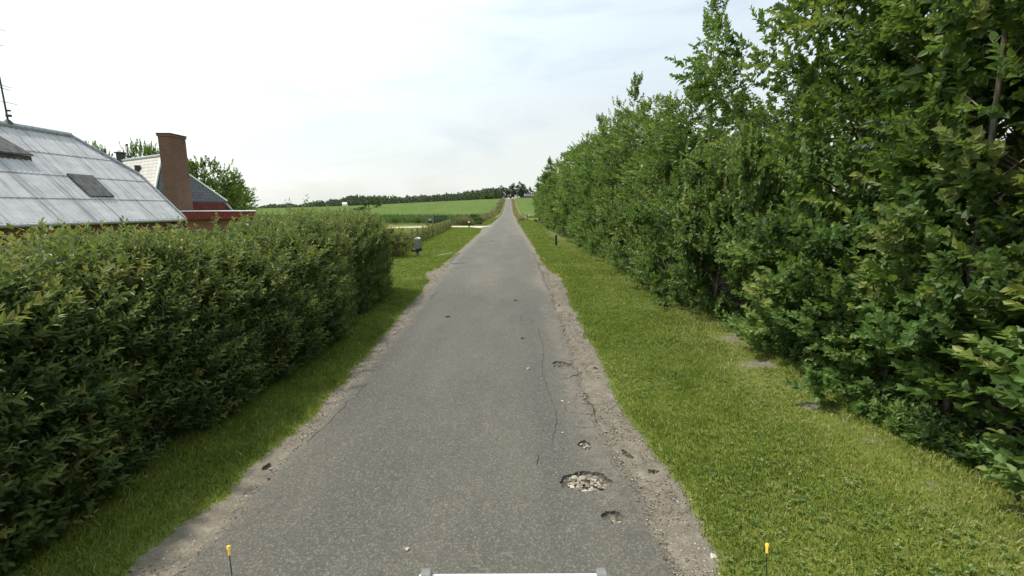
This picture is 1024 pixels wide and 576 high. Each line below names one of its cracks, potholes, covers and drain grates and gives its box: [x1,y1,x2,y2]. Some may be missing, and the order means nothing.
pothole [601,511,623,524]
crack [511,314,594,466]
pothole [559,471,614,491]
